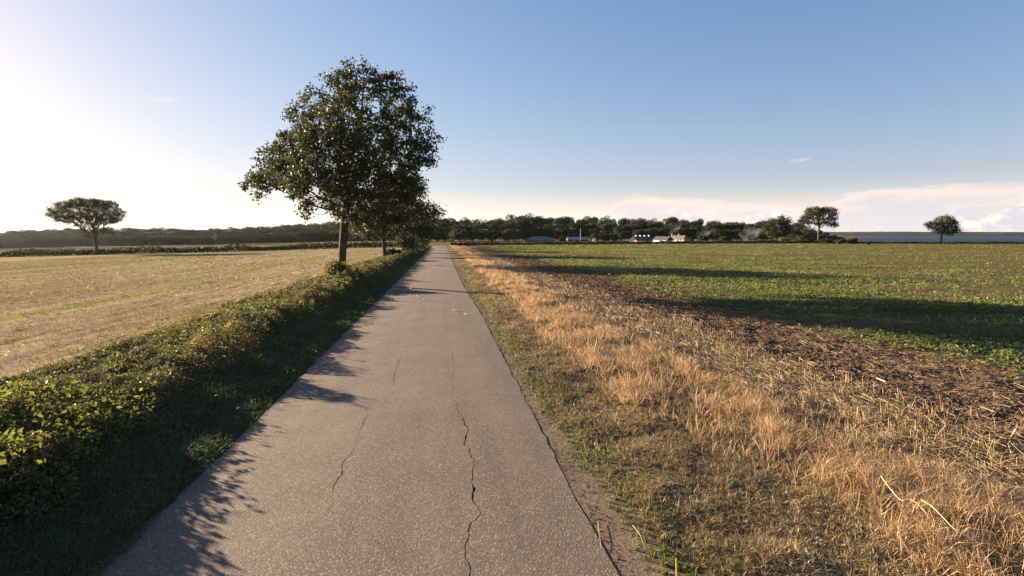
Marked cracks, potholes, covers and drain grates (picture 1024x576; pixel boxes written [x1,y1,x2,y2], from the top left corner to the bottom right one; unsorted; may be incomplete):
crack [329,414,369,510]
crack [445,326,481,576]
